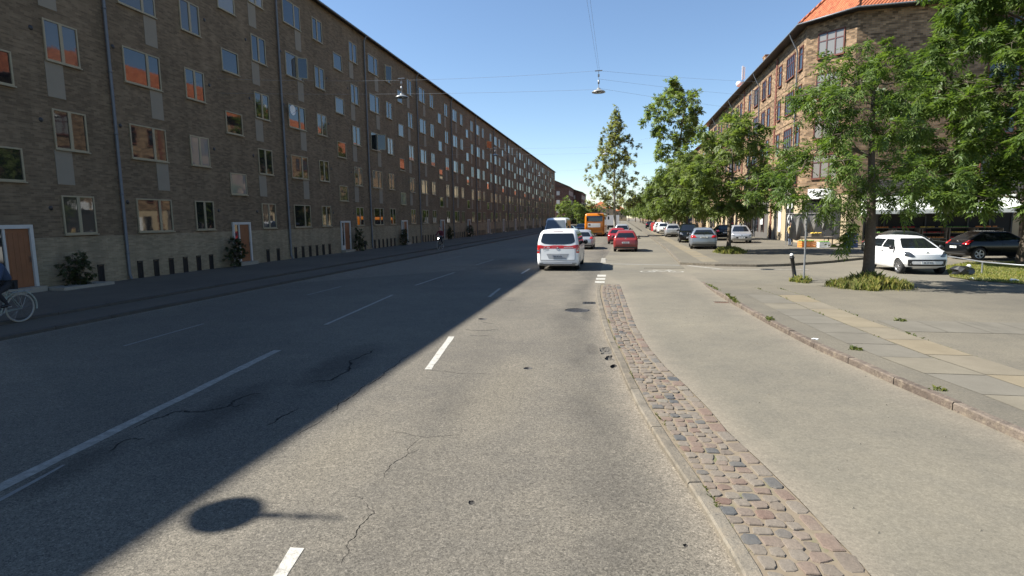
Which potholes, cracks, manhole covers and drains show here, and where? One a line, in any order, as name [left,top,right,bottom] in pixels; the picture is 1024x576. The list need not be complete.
crack [384,431,451,478]
crack [341,496,375,563]
crack [110,393,258,451]
crack [267,350,408,435]
